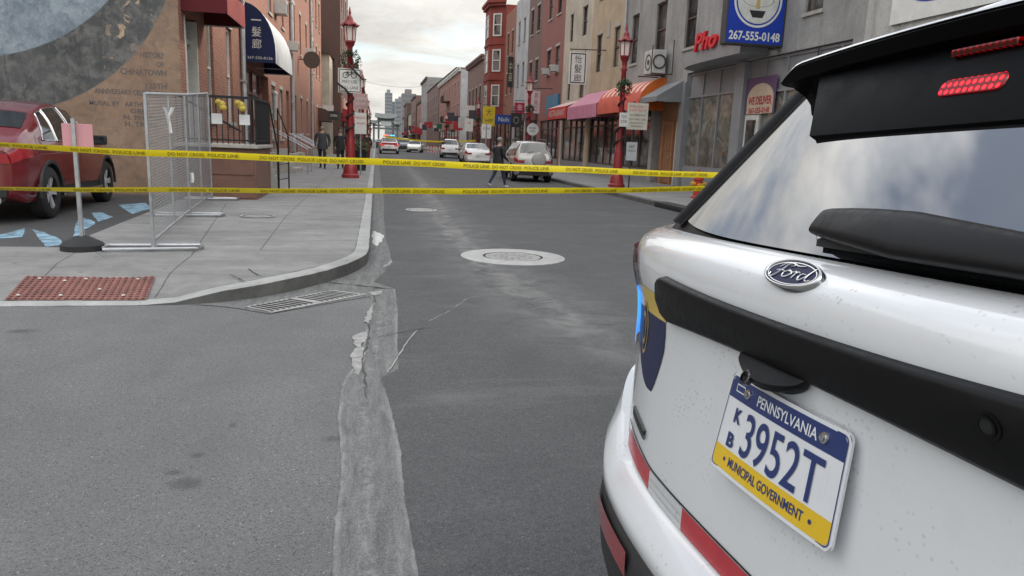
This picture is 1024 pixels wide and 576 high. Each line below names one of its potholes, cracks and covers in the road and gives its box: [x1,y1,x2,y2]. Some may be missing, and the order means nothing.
manhole cover [461,249,565,266]
drain grate [246,290,366,313]
crack [376,296,478,373]
